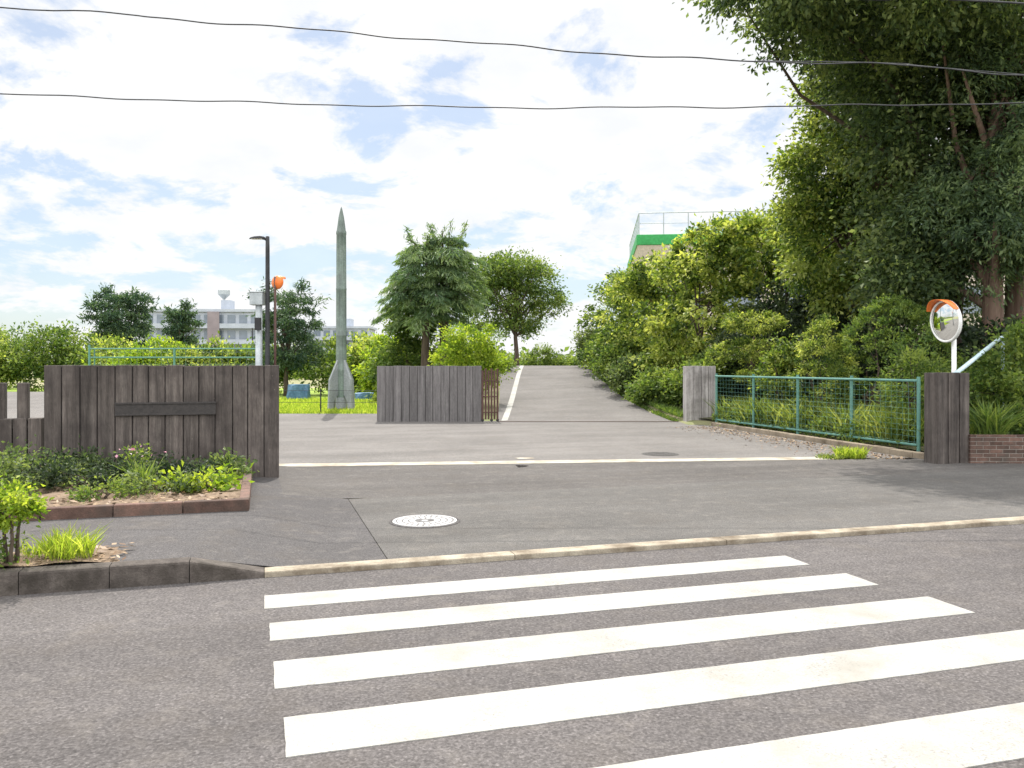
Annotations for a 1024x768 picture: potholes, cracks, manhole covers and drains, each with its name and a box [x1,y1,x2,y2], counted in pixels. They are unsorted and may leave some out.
manhole cover [389,515,460,528]
